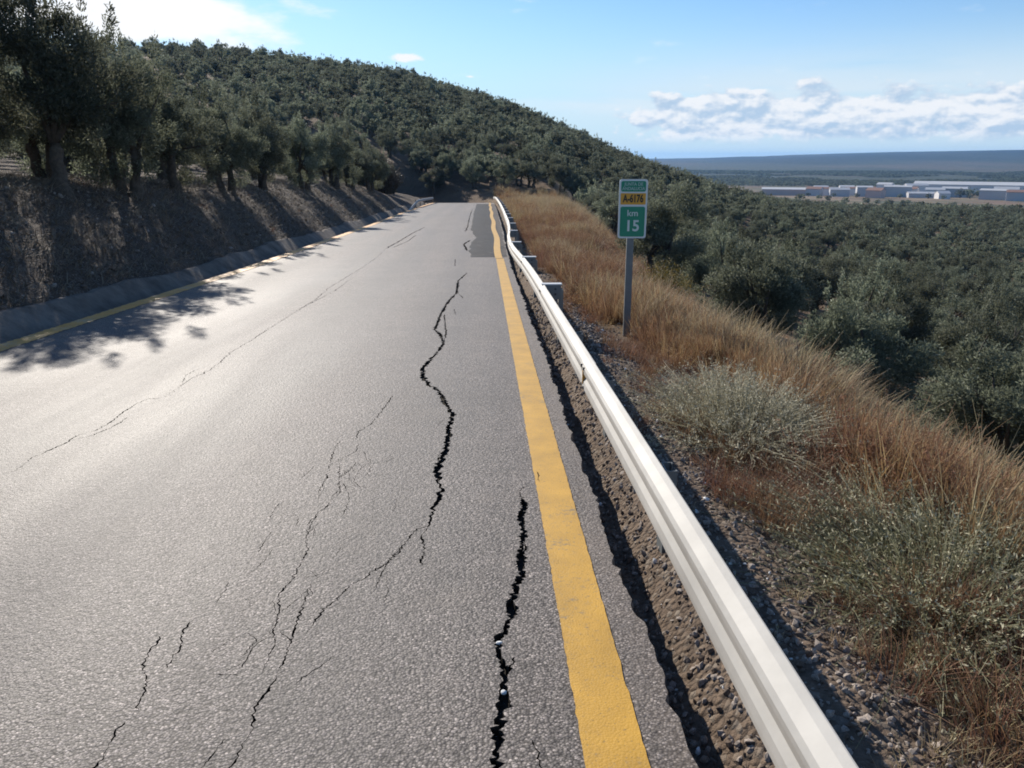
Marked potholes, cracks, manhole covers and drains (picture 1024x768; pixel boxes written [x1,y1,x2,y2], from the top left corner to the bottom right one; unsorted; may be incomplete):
crack [17,250,385,469]
crack [489,472,540,768]
crack [204,210,472,768]
